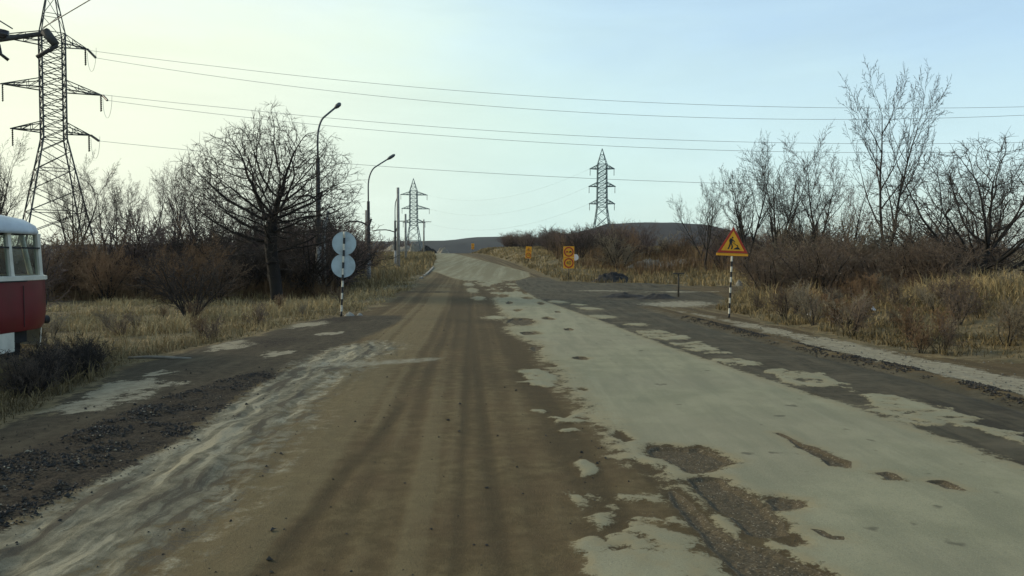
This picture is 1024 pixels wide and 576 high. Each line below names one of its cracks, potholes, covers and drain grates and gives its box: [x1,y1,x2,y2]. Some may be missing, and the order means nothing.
pothole [926,480,965,490]
pothole [876,472,902,480]
pothole [506,318,536,326]
pothole [668,491,828,576]
pothole [775,433,852,468]
pothole [646,446,732,474]
pothole [811,529,845,540]
pothole [687,477,790,538]
